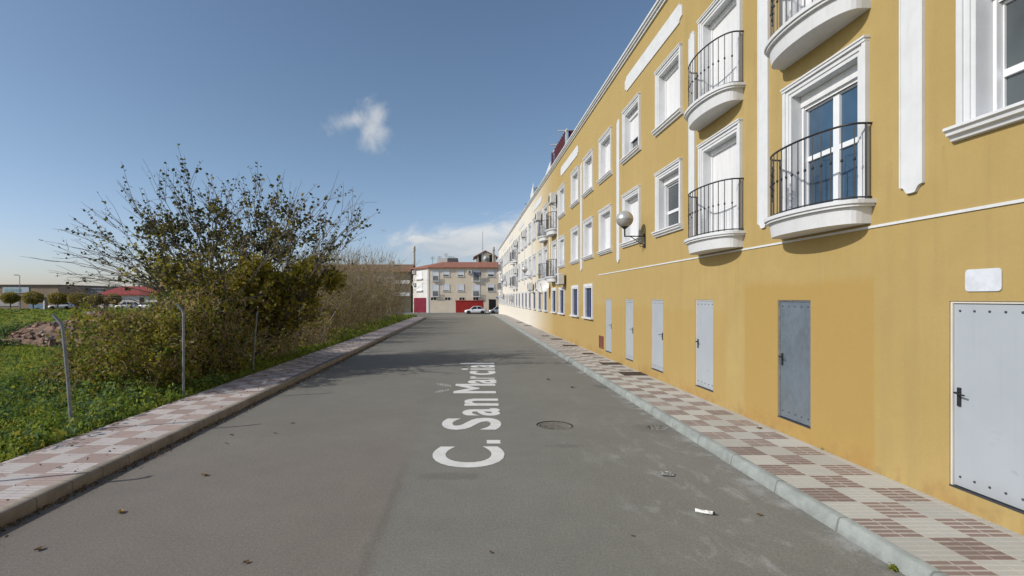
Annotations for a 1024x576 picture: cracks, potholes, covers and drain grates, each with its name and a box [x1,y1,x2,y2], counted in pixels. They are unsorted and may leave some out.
manhole cover [536,421,573,430]
